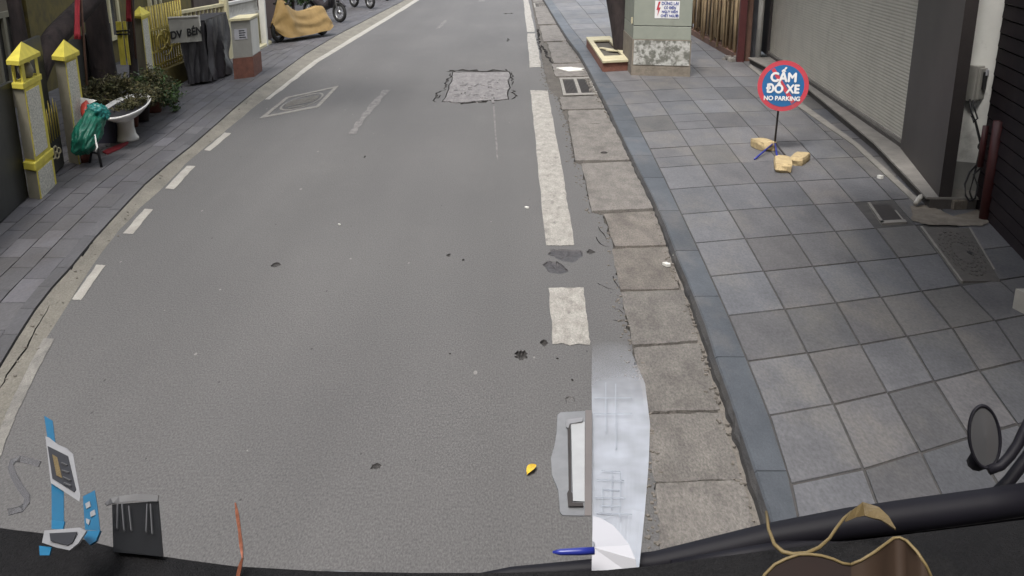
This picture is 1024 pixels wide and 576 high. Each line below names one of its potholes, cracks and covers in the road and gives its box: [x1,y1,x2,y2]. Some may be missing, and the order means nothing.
manhole cover [259,86,339,119]
crack [0,306,49,388]
manhole cover [920,226,1000,283]
pothole [548,249,583,263]
pothole [543,261,568,274]
drain grate [559,77,598,97]
